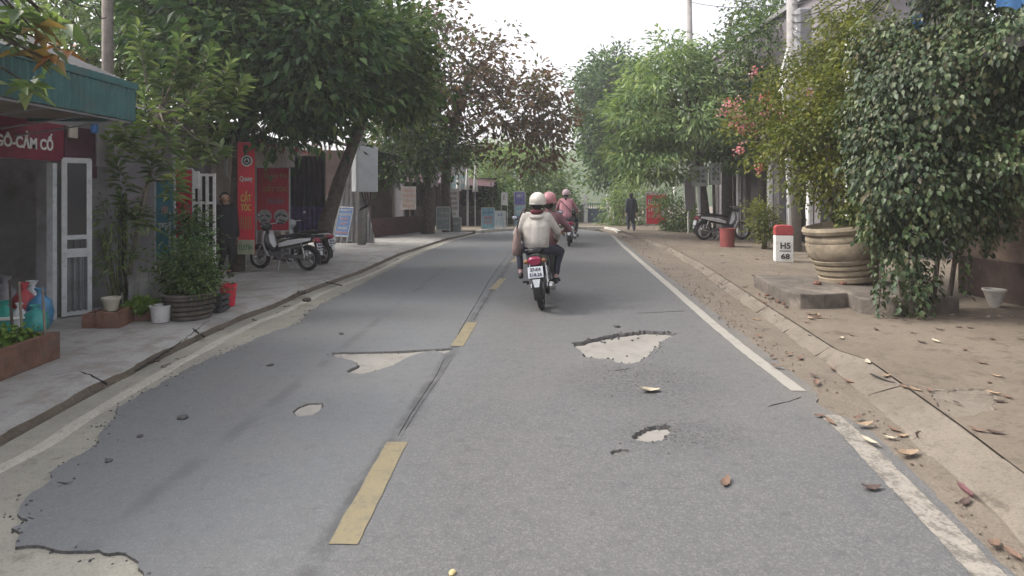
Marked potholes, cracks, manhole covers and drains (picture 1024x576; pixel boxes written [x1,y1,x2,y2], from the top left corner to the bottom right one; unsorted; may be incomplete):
pothole [572,330,678,364]
pothole [293,403,324,416]
pothole [327,348,452,374]
pothole [631,423,673,443]
crack [57,371,107,386]
